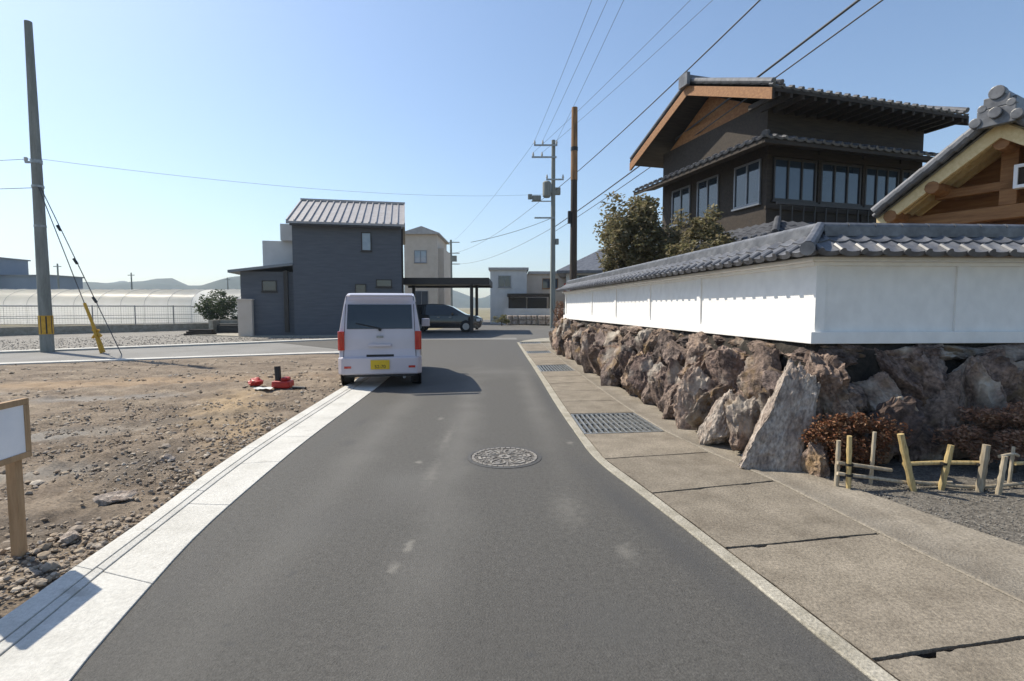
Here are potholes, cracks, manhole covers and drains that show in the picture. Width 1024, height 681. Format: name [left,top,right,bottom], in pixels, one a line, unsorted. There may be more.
drain grate [537,364,575,372]
manhole cover [467,447,542,469]
drain grate [571,413,664,435]
